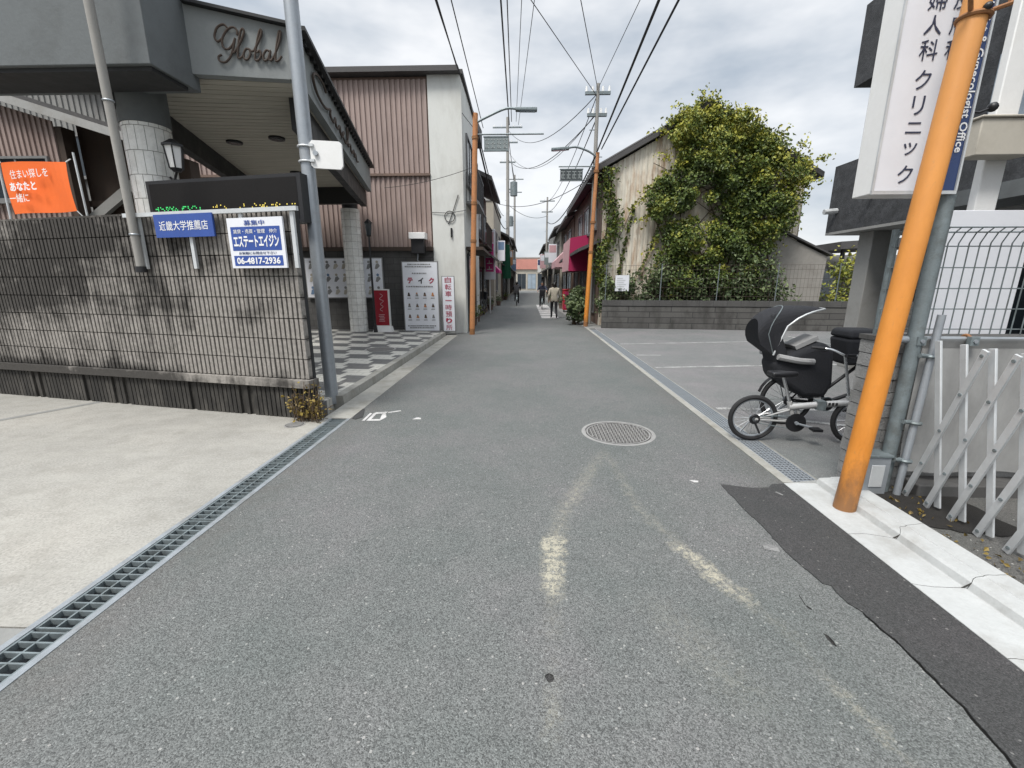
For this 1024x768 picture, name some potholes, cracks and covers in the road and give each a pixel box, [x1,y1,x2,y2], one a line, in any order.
drain grate [190,463,289,521]
manhole cover [581,421,656,446]
crack [916,576,984,588]
drain grate [320,419,346,428]
drain grate [0,631,69,684]
drain grate [35,520,213,632]
drain grate [271,428,334,463]
